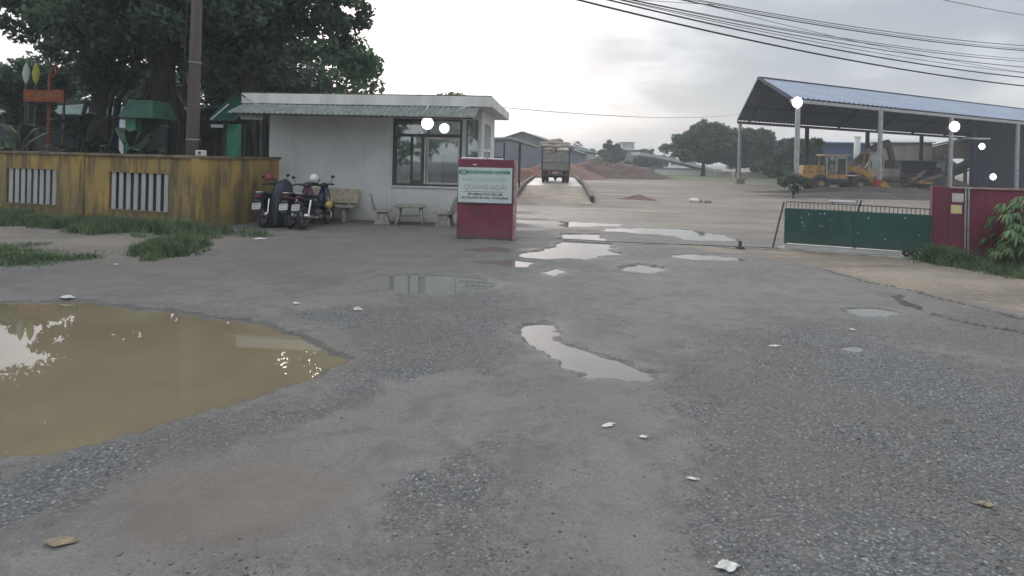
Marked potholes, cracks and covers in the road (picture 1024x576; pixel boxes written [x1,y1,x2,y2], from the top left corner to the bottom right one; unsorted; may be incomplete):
crack [822,270,1024,334]
pothole [353,273,497,295]
pothole [0,299,357,459]
pothole [517,233,625,260]
pothole [513,320,662,382]
pothole [837,343,870,353]
pothole [615,262,667,273]
pothole [838,307,901,318]
